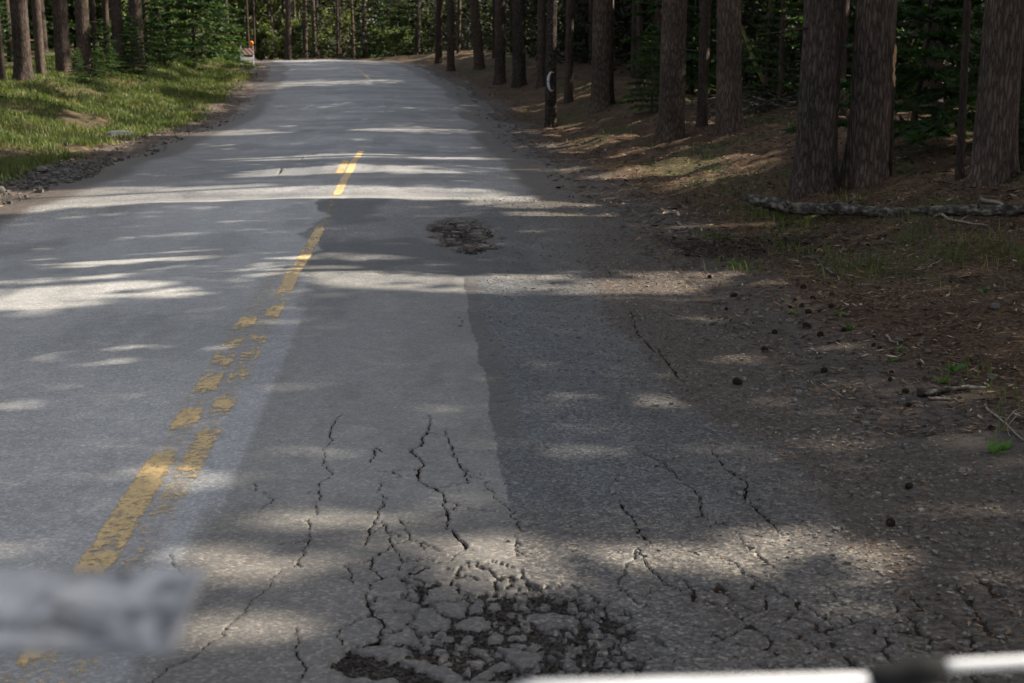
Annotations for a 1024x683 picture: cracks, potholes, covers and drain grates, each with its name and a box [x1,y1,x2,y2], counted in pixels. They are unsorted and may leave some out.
crack [336,423,526,648]
crack [613,448,1022,683]
pothole [430,221,499,255]
crack [631,313,681,381]
pothole [330,565,650,683]
crack [152,421,336,683]
